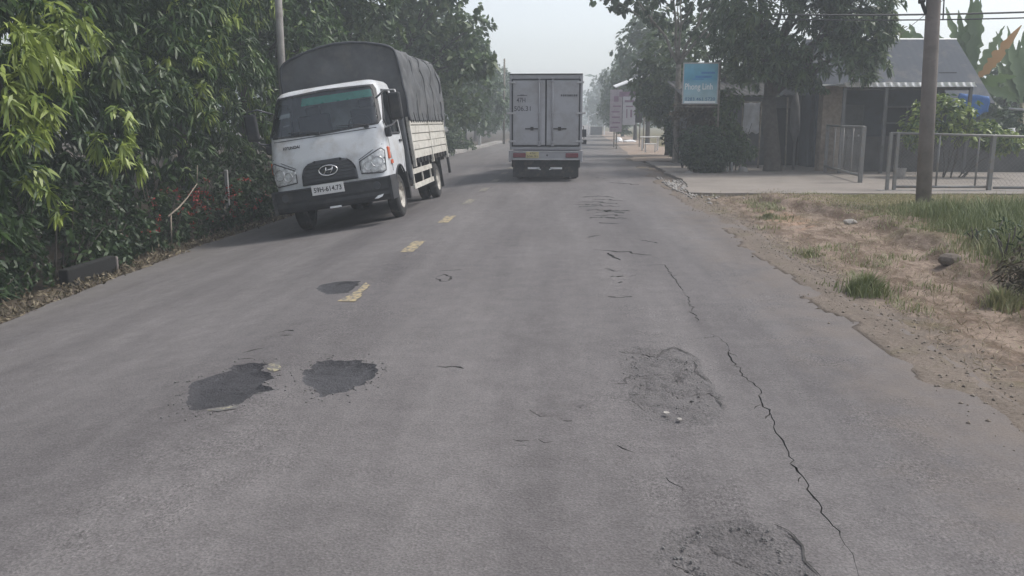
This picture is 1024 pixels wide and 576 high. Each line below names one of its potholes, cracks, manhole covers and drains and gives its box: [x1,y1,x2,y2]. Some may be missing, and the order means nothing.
crack [617,265,859,576]
crack [516,394,594,447]
crack [577,182,657,299]
